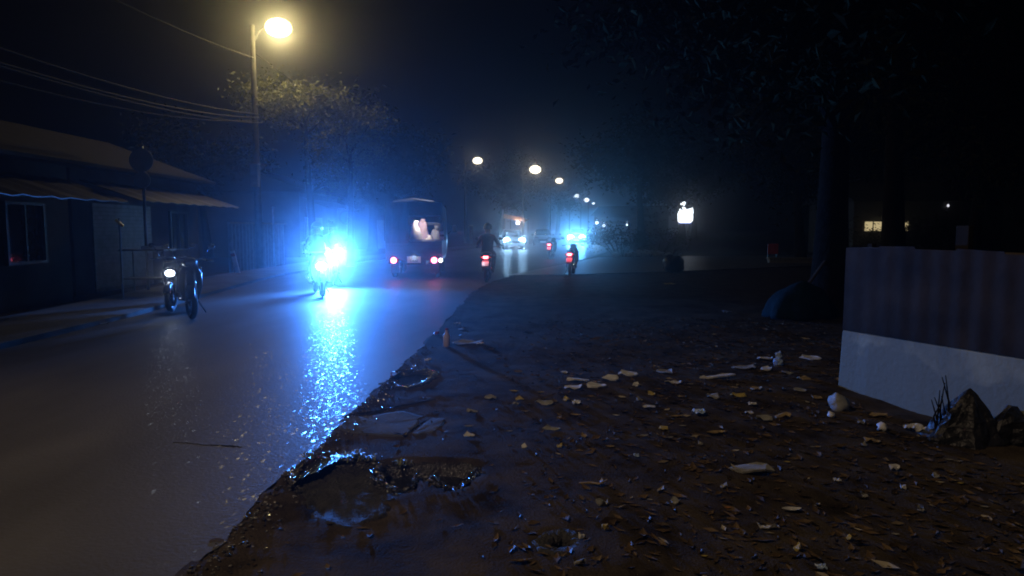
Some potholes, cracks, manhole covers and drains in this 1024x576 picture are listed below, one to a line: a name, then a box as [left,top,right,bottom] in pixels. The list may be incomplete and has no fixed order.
pothole [532,528,586,555]
pothole [392,368,439,388]
crack [342,399,446,434]
pothole [367,461,481,496]
